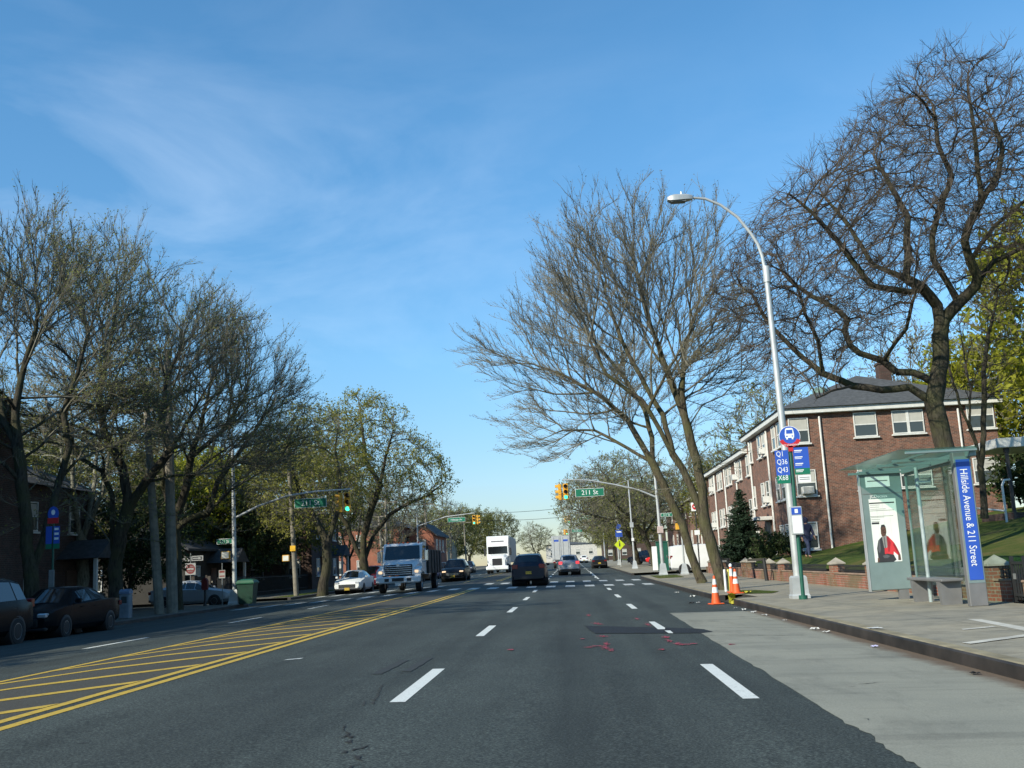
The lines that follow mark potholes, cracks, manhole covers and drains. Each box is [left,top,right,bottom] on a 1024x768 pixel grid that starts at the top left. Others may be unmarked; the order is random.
crack [342,726,368,768]
